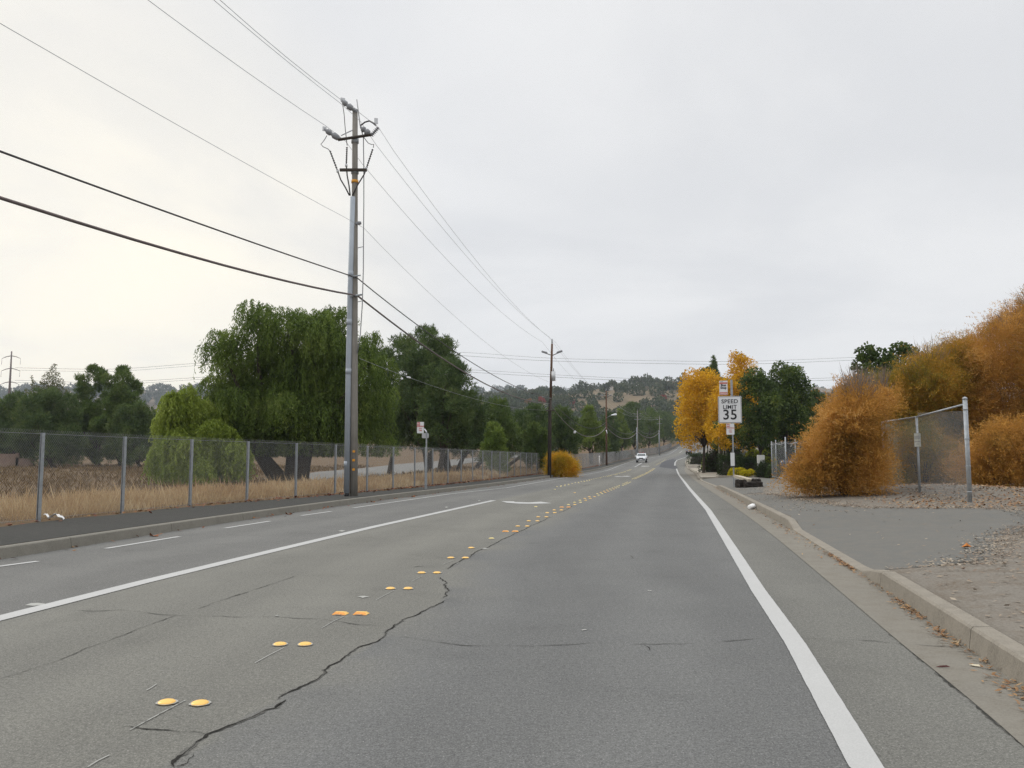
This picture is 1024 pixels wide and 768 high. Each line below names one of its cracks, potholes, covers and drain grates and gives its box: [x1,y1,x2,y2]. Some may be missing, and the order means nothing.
crack [3,506,583,766]
